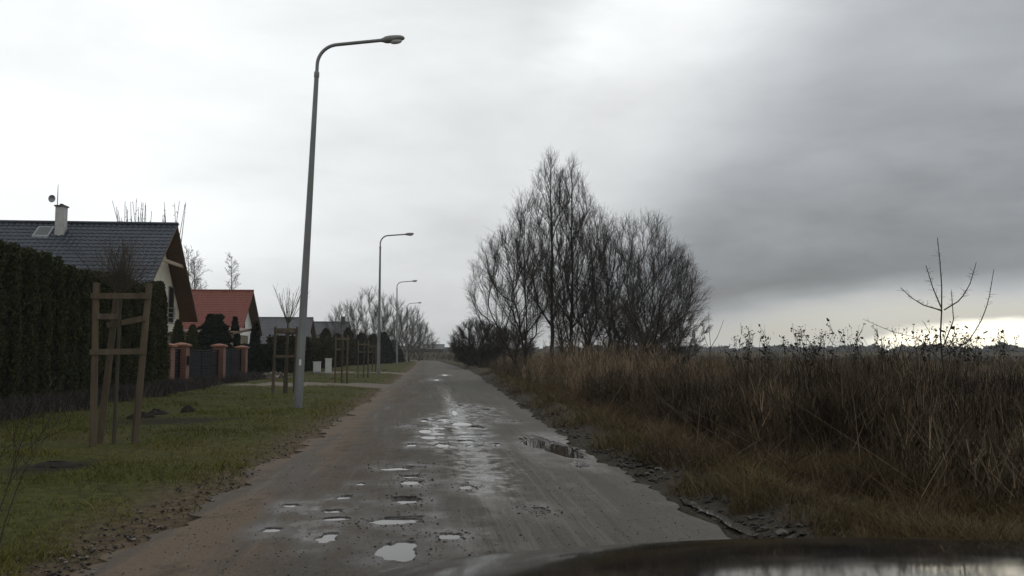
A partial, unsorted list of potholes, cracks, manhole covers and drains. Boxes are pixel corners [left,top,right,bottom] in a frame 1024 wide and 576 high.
pothole [515,435,590,460]
pothole [357,515,425,525]
pothole [313,532,340,543]
pothole [373,540,419,562]
pothole [389,496,423,504]
